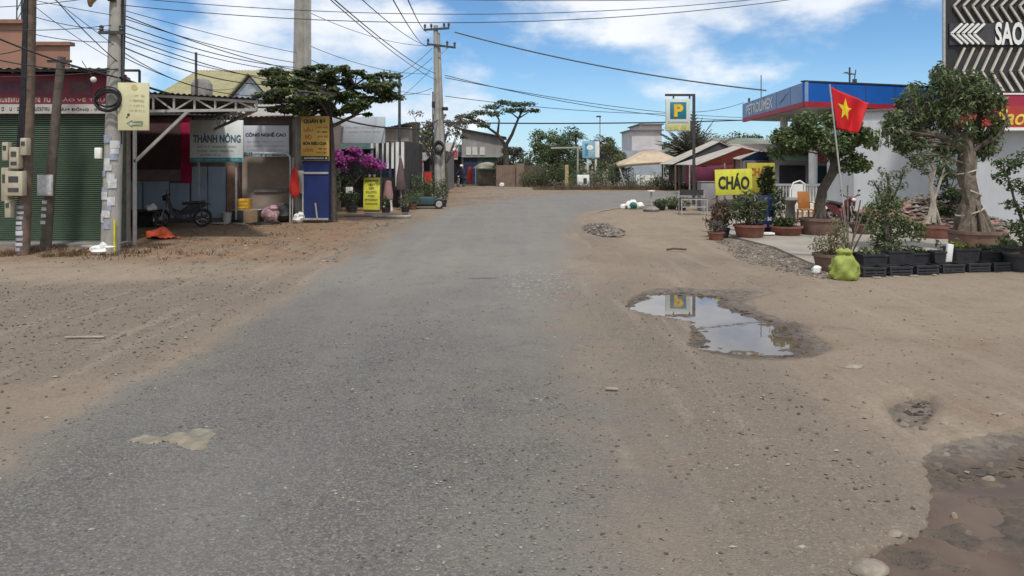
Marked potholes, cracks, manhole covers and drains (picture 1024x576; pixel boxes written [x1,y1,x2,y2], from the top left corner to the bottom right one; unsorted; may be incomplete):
pothole [888,399,933,427]
pothole [822,426,1024,576]
pothole [625,286,831,361]
